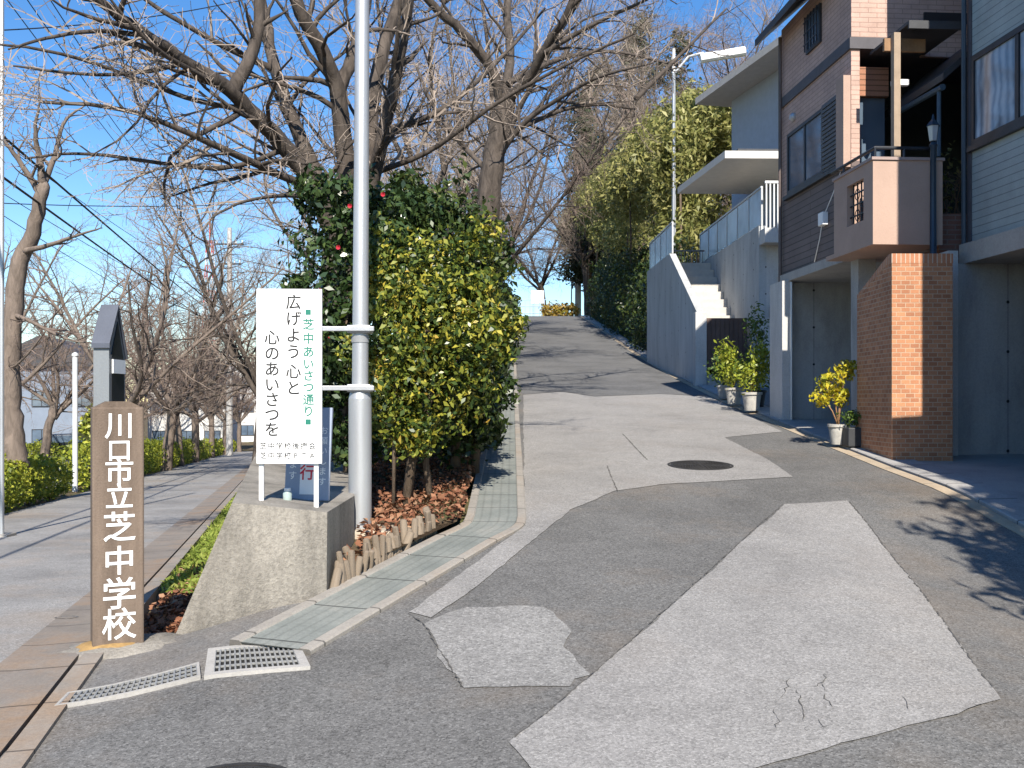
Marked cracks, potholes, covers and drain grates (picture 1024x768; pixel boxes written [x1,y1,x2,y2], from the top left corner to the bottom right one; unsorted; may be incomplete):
manhole cover [667,460,734,470]
drain grate [54,662,201,708]
drain grate [204,644,310,680]
crack [773,674,832,728]
